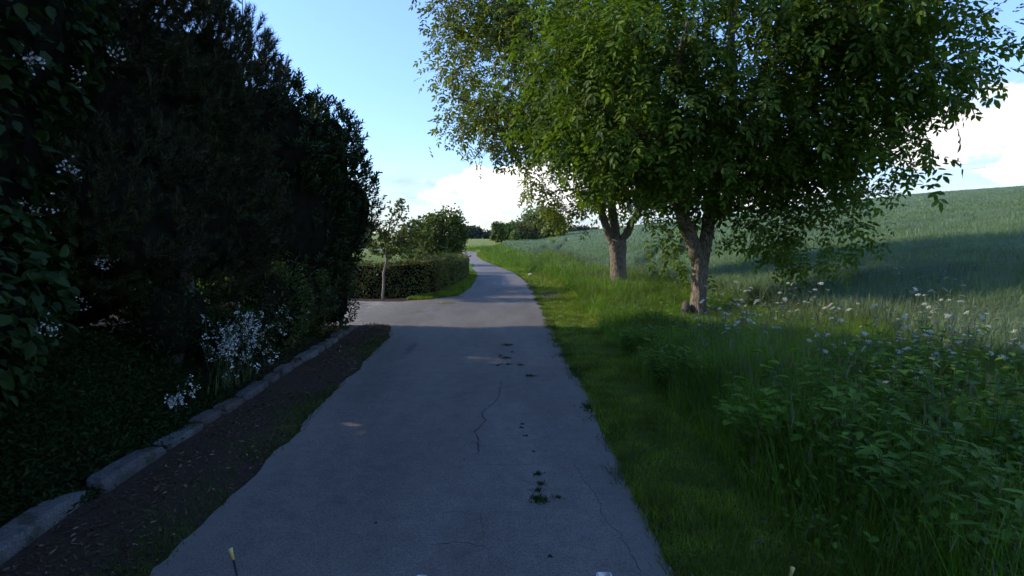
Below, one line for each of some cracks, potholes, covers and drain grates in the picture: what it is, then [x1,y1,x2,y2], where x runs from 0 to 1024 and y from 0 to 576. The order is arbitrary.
crack [572,459,638,567]
crack [460,375,530,465]
